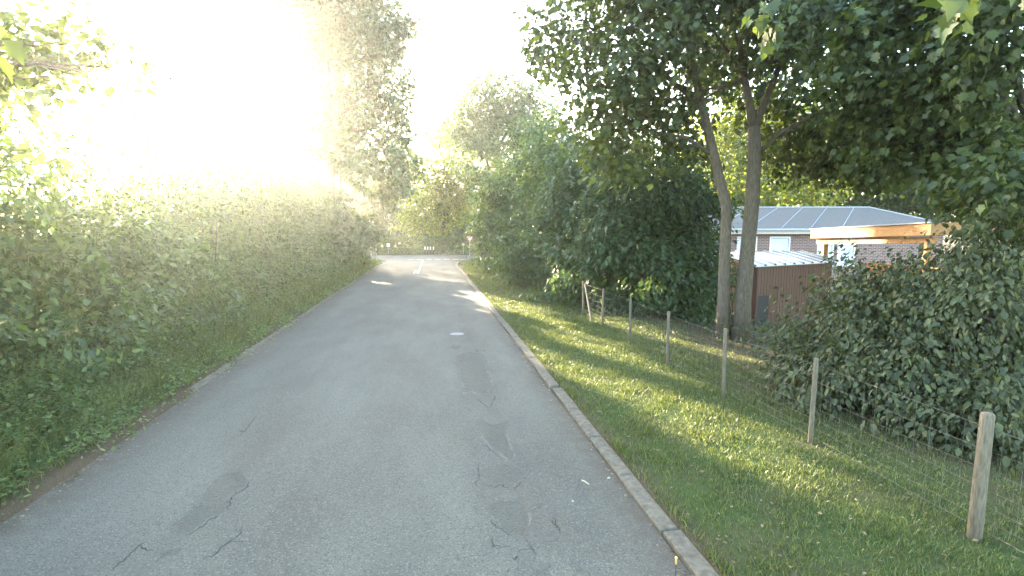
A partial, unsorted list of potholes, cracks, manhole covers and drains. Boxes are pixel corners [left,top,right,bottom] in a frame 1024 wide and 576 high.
crack [187,483,249,557]
crack [491,518,563,573]
crack [113,540,152,571]
crack [475,445,520,491]
